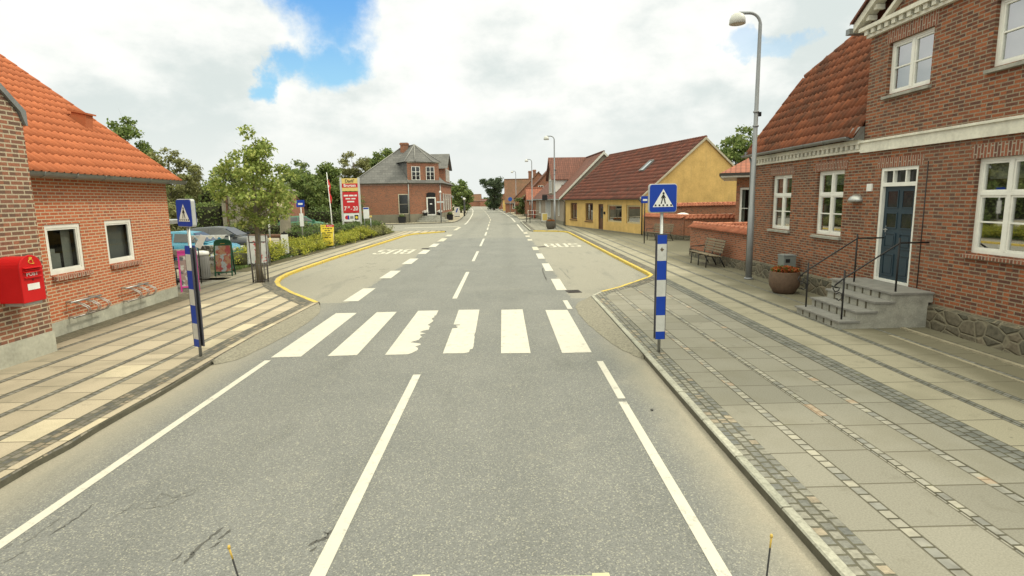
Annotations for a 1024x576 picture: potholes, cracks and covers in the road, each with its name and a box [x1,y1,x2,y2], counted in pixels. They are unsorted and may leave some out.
crack [3,504,93,563]
crack [309,526,335,551]
crack [115,487,198,517]
crack [172,527,231,564]
